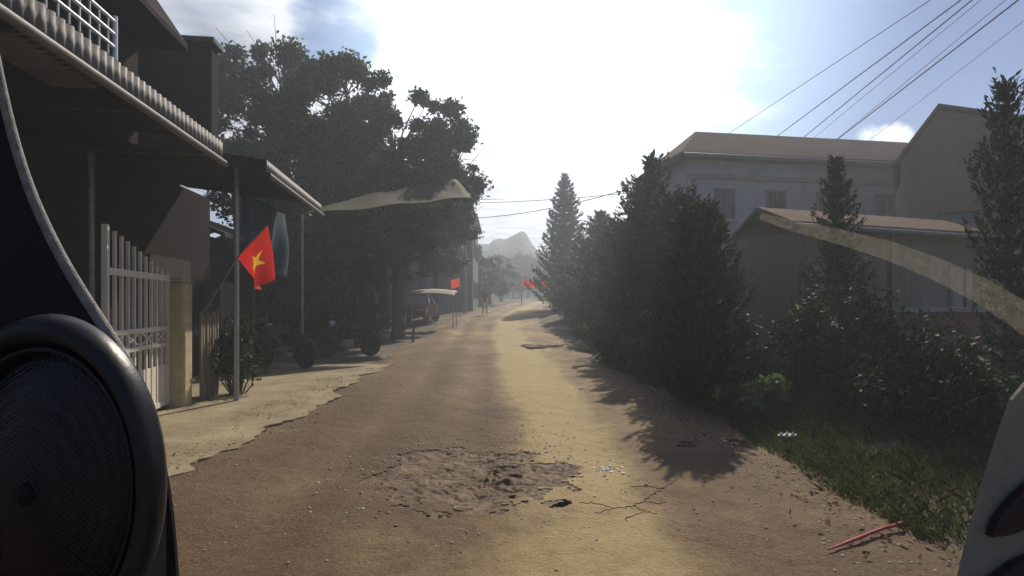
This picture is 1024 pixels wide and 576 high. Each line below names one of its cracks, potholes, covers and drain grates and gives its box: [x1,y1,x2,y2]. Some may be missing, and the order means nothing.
pothole [355,446,584,520]
crack [579,477,677,522]
